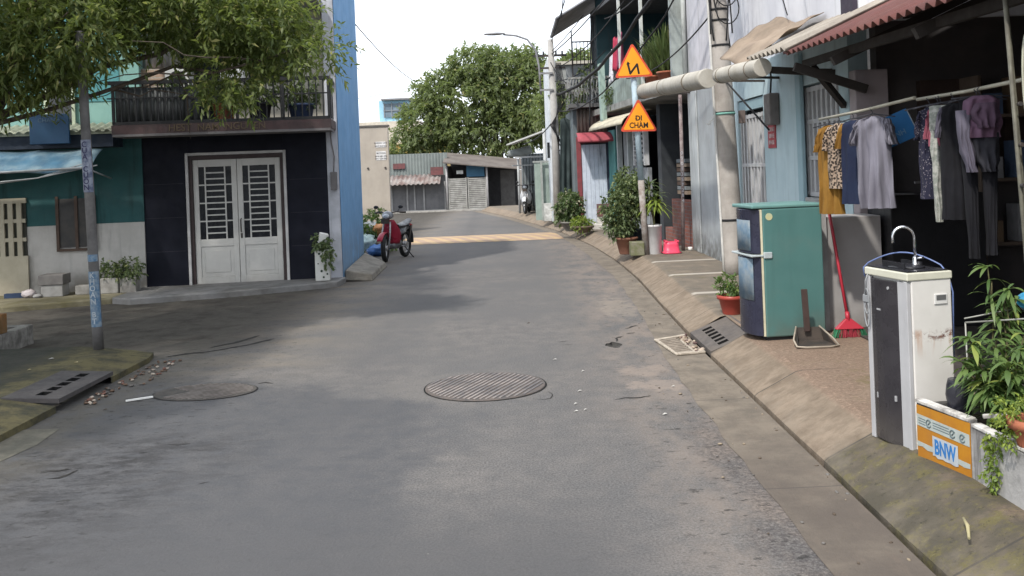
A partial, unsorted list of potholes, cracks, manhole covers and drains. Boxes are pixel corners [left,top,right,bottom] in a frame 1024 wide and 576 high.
manhole cover [152,383,258,401]
drain grate [0,371,113,403]
crack [168,335,271,357]
manhole cover [424,372,547,401]
drain grate [690,315,747,357]
